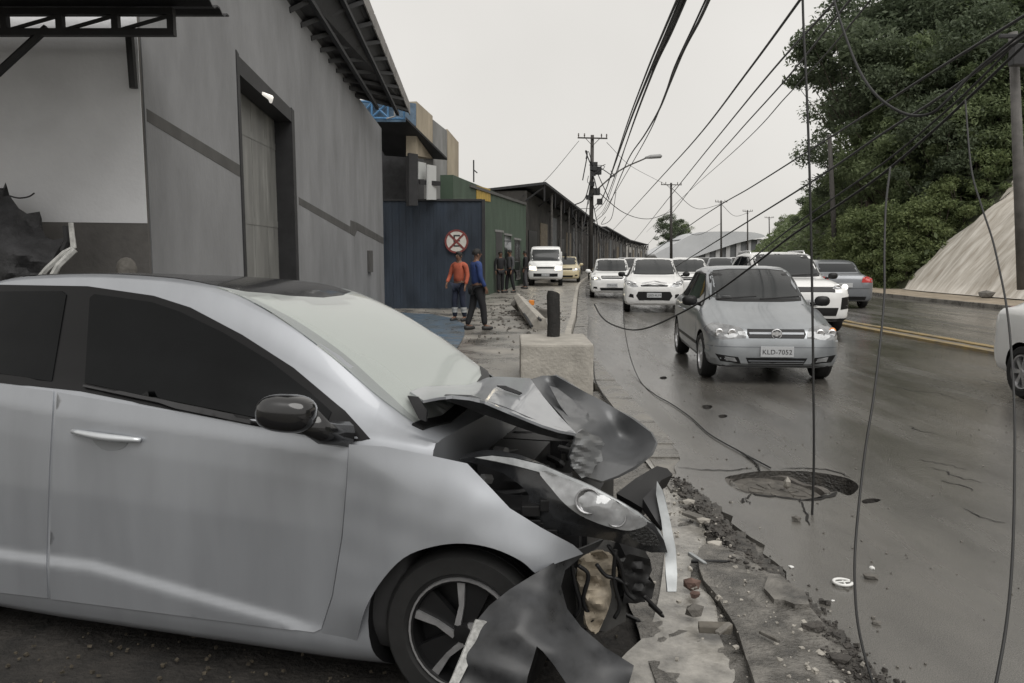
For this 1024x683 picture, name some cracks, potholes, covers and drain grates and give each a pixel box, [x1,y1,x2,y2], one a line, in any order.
crack [921,459,981,490]
manhole cover [725,475,830,499]
crack [736,468,849,524]
